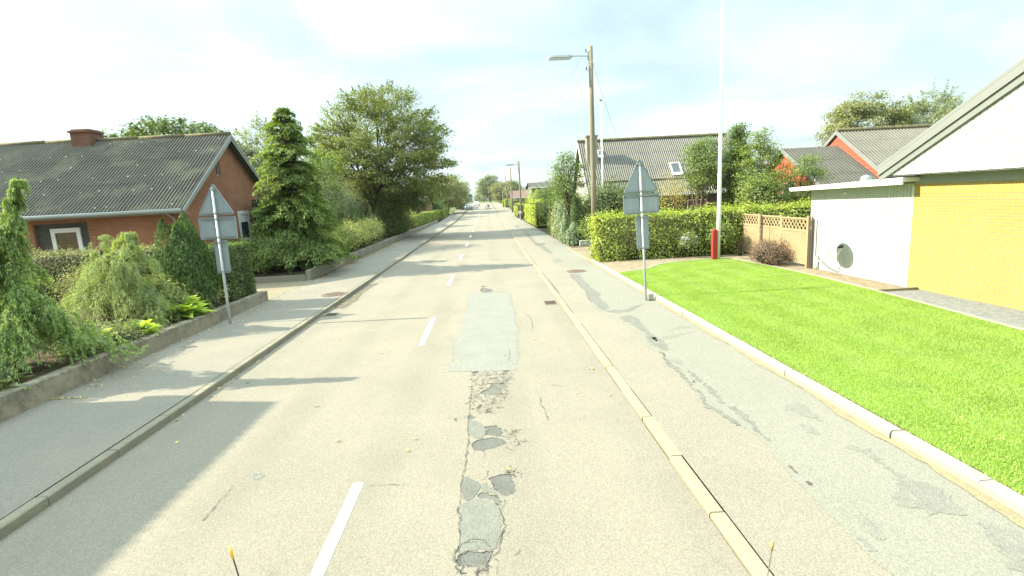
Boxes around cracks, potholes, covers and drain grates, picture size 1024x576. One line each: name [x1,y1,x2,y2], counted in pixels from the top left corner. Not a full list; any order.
pothole [485,425,503,437]
pothole [472,437,505,451]
pothole [477,491,503,506]
pothole [481,383,508,395]
pothole [455,551,493,567]
pothole [489,474,516,496]
